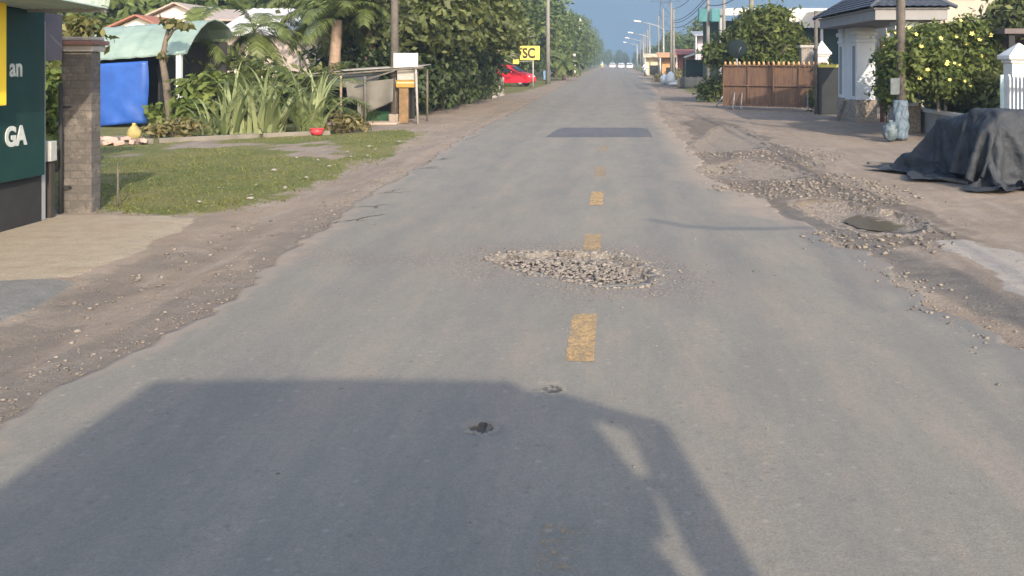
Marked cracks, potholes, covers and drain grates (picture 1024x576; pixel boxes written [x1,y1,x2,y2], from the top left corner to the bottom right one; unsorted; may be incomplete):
pothole [463,420,501,437]
crack [324,188,410,227]
pothole [787,197,936,238]
pothole [473,249,671,290]
pothole [536,384,567,395]
